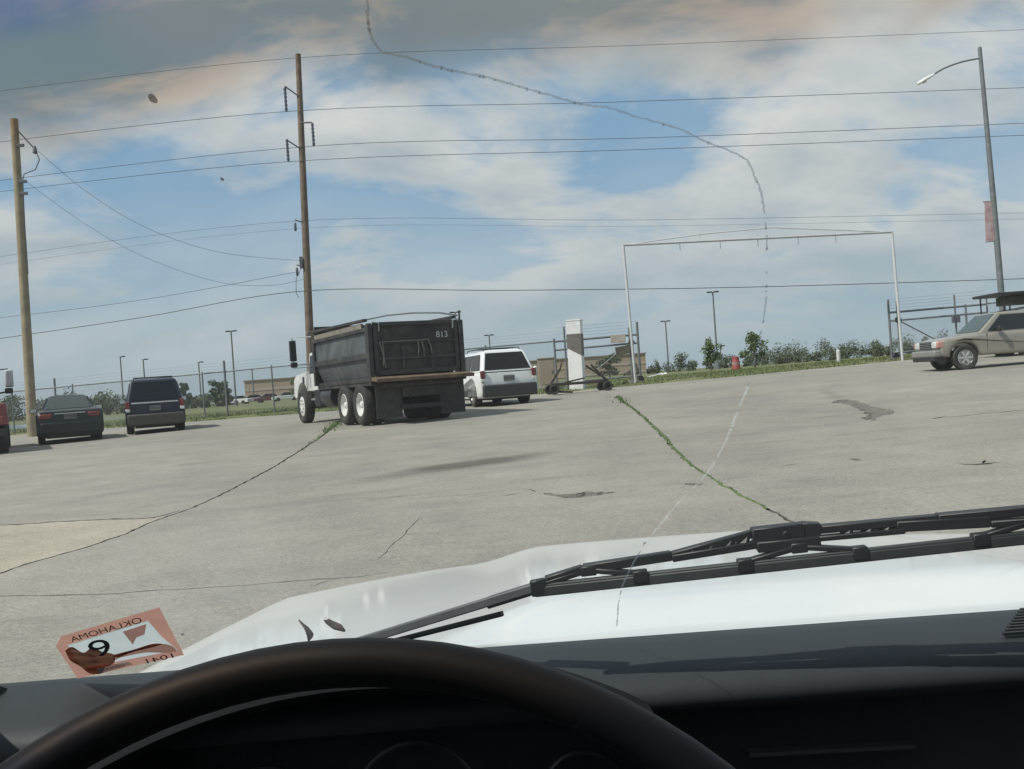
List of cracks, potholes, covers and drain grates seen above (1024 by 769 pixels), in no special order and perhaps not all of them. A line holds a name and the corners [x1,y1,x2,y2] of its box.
crack [607,395,794,522]
